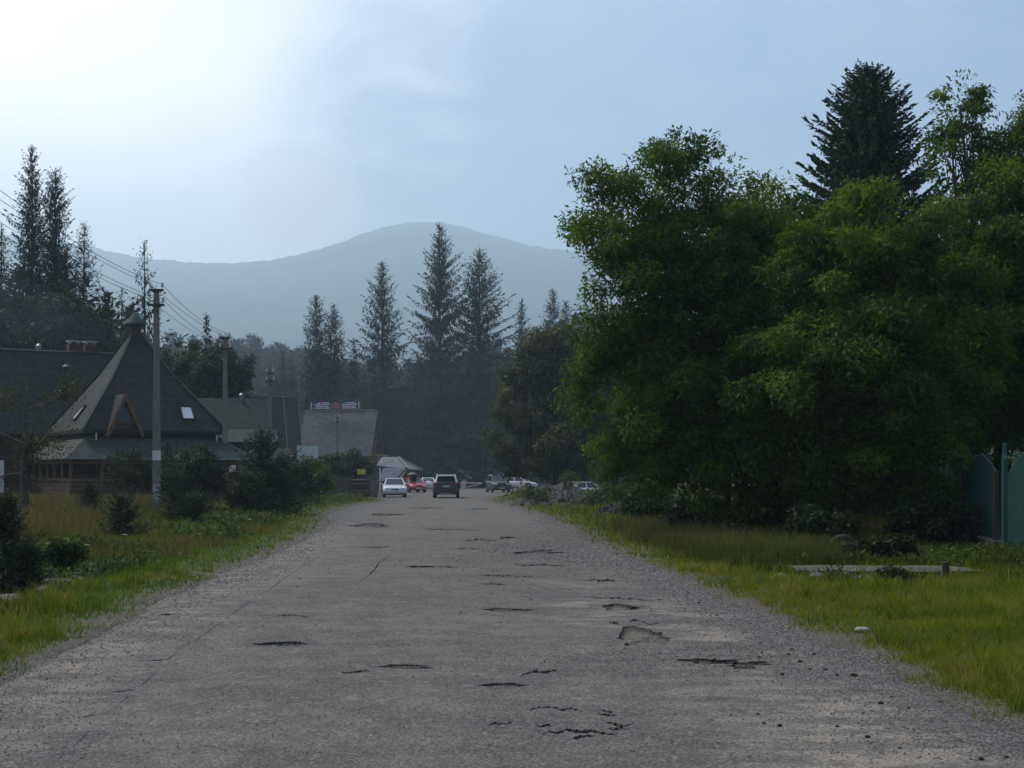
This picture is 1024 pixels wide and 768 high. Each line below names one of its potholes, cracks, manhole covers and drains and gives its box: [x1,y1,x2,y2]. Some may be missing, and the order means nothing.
pothole [602,603,641,611]
pothole [616,626,670,649]
crack [45,548,335,757]
pothole [725,661,773,669]
